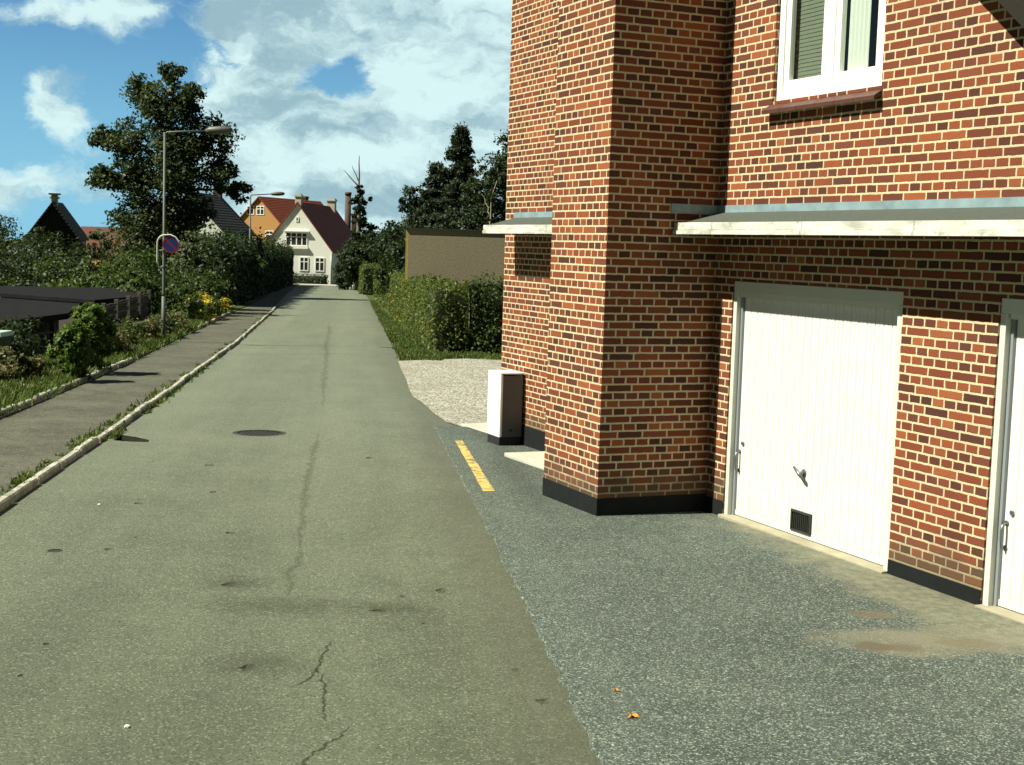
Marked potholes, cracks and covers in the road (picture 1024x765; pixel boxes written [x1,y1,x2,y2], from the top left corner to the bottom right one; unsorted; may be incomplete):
crack [287,644,349,765]
